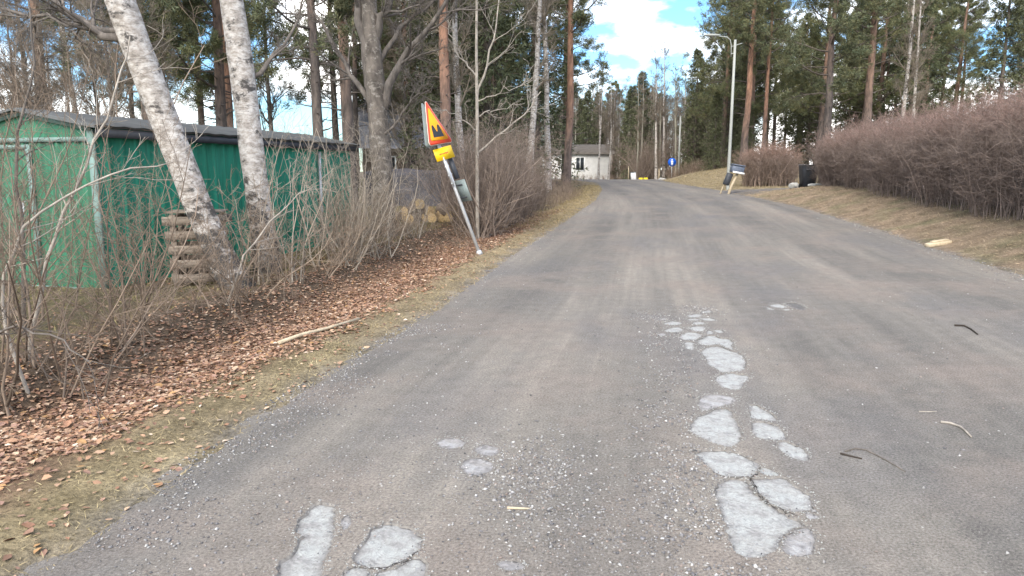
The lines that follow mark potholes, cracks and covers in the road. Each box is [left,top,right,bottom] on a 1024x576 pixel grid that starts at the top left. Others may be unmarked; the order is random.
pothole [342,565,374,576]
pothole [700,345,747,373]
pothole [352,522,424,568]
pothole [751,421,788,440]
pothole [749,476,815,512]
pothole [474,444,500,456]
pothole [779,526,817,557]
pothole [374,556,429,576]
pothole [275,502,339,576]
pothole [435,437,467,449]
pothole [776,440,810,461]
pothole [714,477,804,558]
